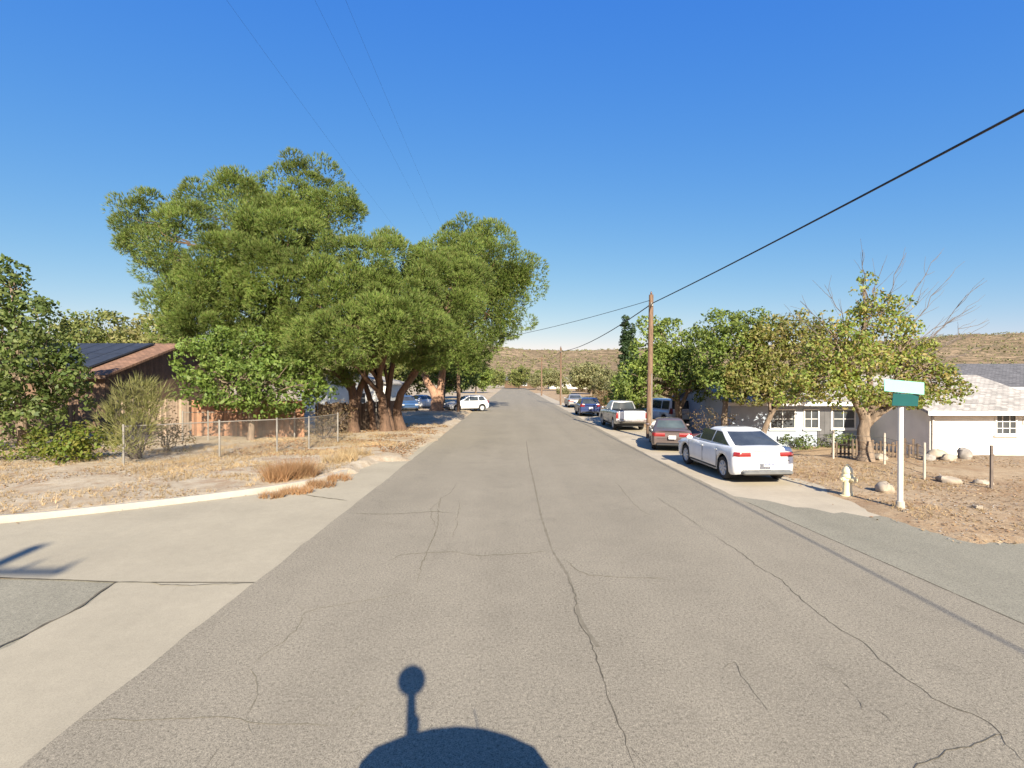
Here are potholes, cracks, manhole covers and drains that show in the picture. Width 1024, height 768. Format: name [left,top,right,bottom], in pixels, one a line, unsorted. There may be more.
crack [717,537,1021,768]
crack [361,481,541,587]
crack [78,591,409,768]
